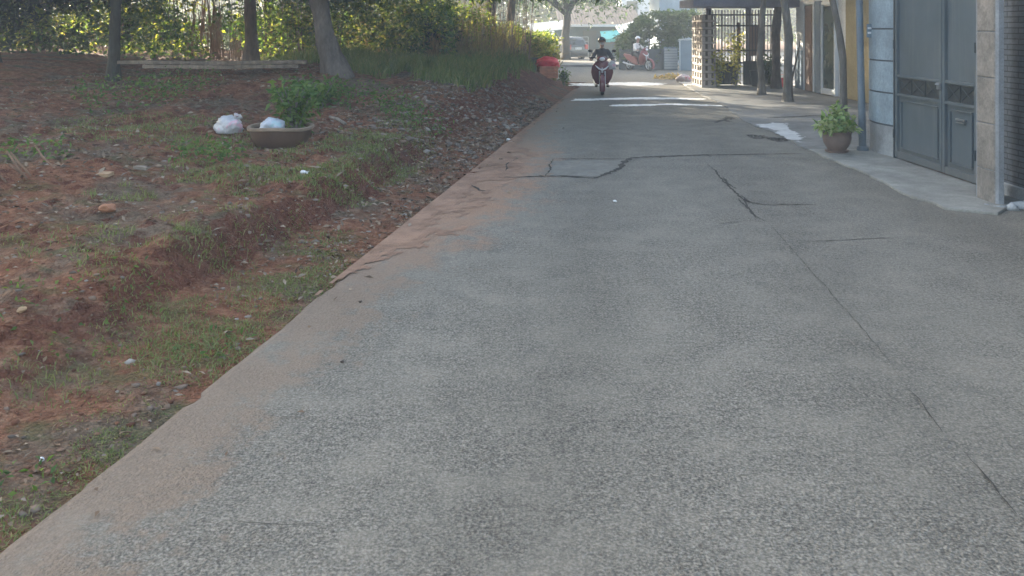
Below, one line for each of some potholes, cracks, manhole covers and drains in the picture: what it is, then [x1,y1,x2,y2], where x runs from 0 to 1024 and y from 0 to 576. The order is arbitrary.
crack [472,153,1018,515]
